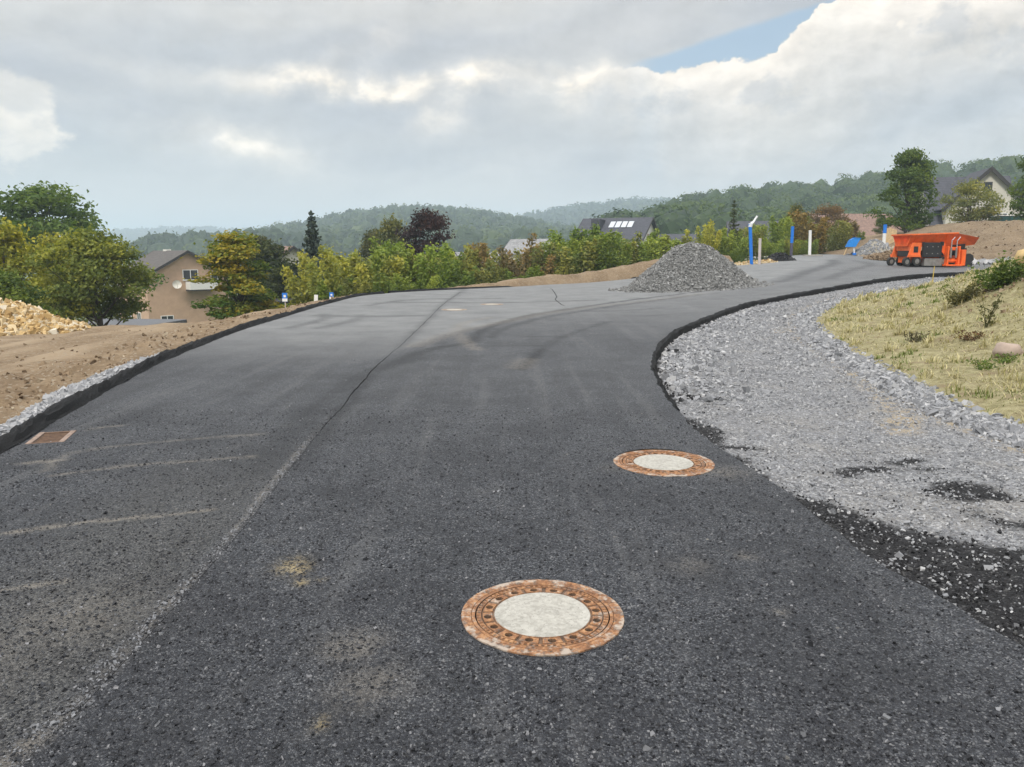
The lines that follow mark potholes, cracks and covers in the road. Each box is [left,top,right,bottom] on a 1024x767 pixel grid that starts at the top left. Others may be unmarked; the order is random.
drain grate [25,430,76,444]
manhole cover [461,579,625,657]
manhole cover [613,449,715,477]
